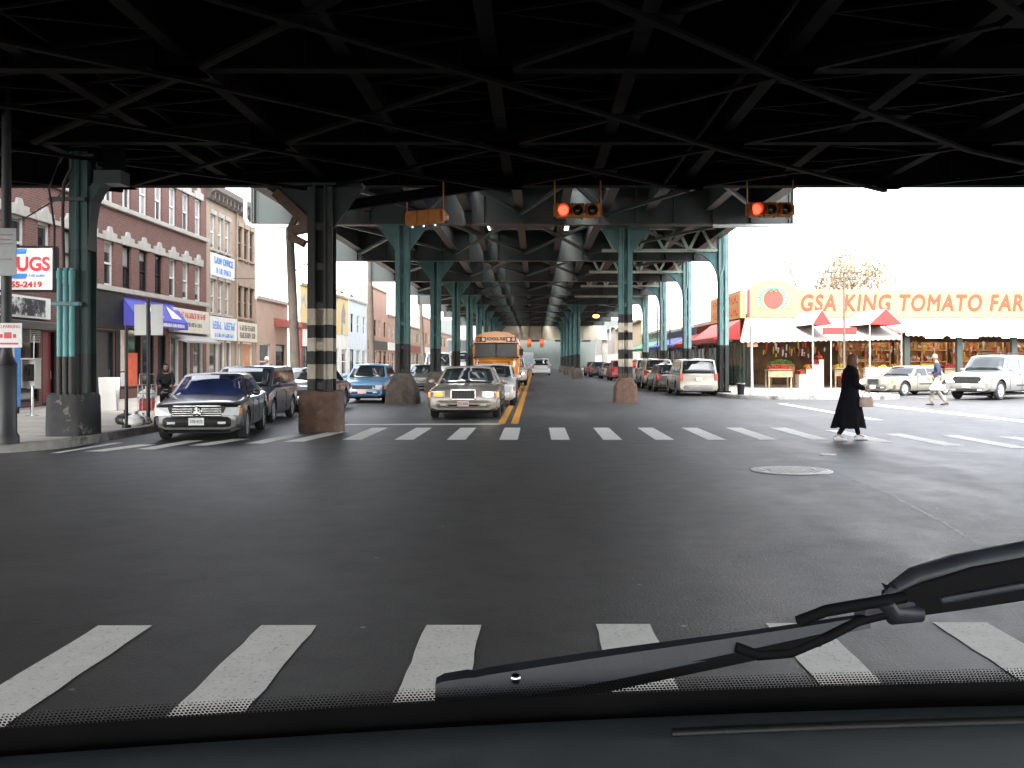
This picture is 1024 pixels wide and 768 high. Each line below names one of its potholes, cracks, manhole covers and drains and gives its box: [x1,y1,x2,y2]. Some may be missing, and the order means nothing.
manhole cover [750,466,833,475]
